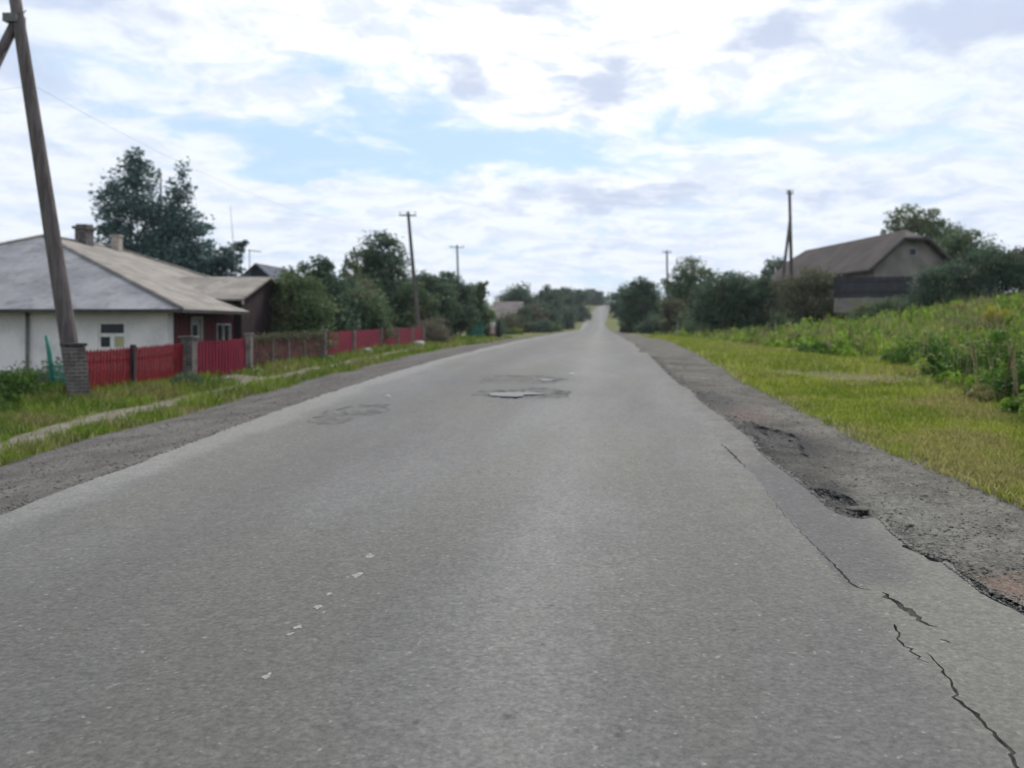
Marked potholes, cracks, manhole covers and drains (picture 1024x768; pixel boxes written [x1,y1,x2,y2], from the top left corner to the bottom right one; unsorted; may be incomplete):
pothole [471,388,571,400]
pothole [742,422,809,457]
crack [882,592,1019,768]
pothole [814,488,873,518]
